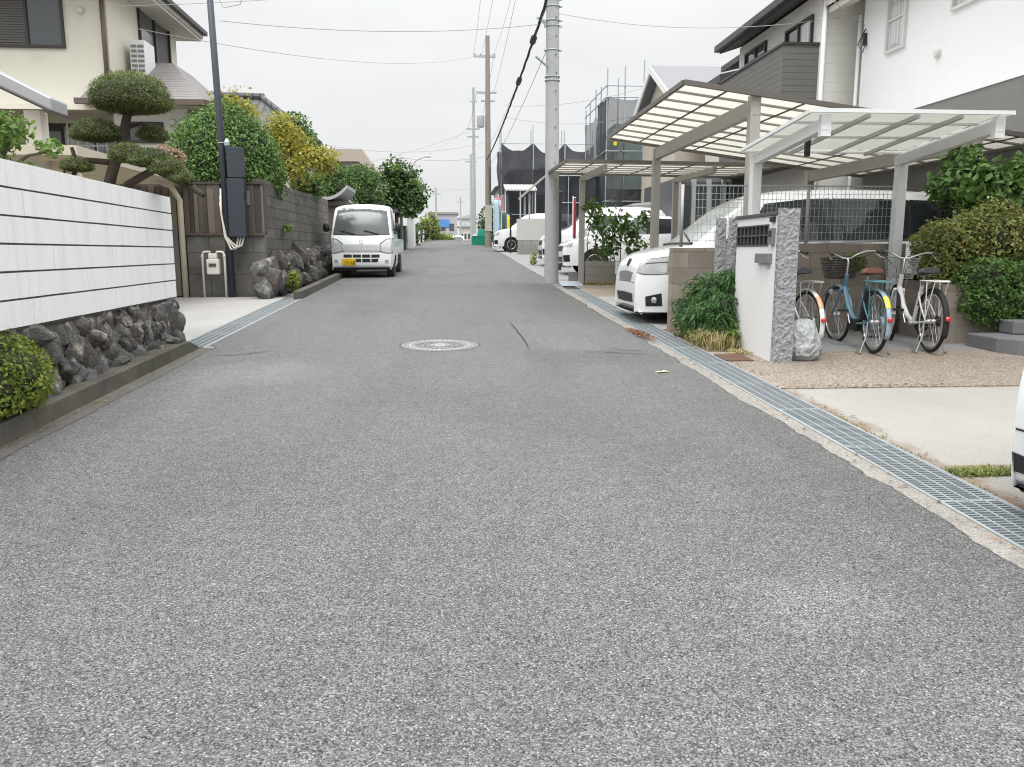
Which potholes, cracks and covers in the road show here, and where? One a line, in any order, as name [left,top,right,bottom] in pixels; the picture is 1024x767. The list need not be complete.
drain grate [603,309,635,317]
manhole cover [399,339,481,351]
drain grate [206,322,252,334]
drain grate [698,362,765,383]
drain grate [650,335,695,348]
drain grate [733,382,817,409]
drain grate [231,313,270,323]
drain grate [845,445,997,501]
drain grate [942,499,1024,548]
drain grate [251,306,284,314]
drain grate [631,325,671,335]
drain grate [190,333,230,348]
